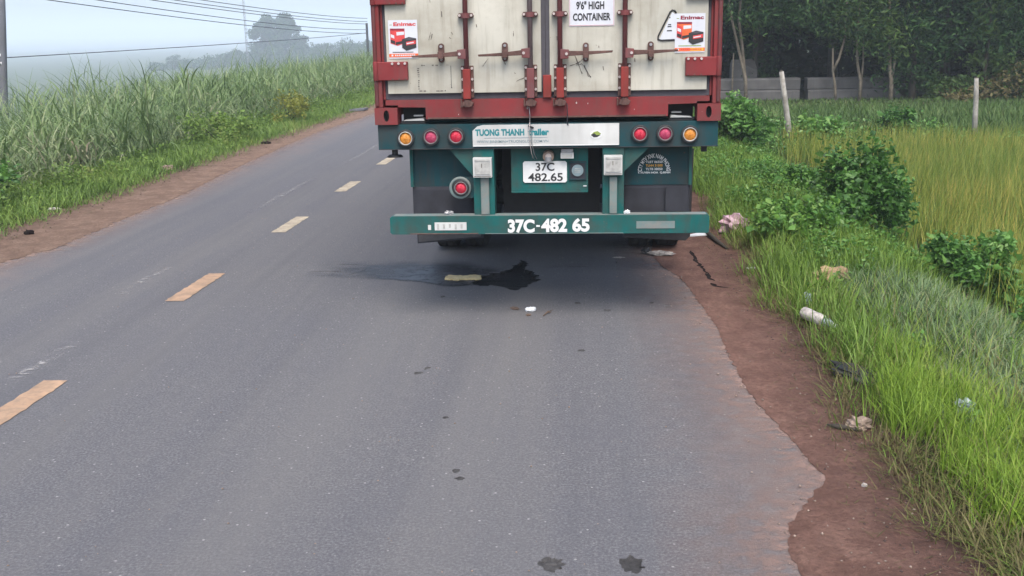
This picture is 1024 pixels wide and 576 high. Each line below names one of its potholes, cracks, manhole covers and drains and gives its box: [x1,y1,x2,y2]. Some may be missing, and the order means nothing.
pothole [537,557,566,573]
crack [689,251,727,288]
pothole [469,260,541,291]
pothole [619,555,645,574]
